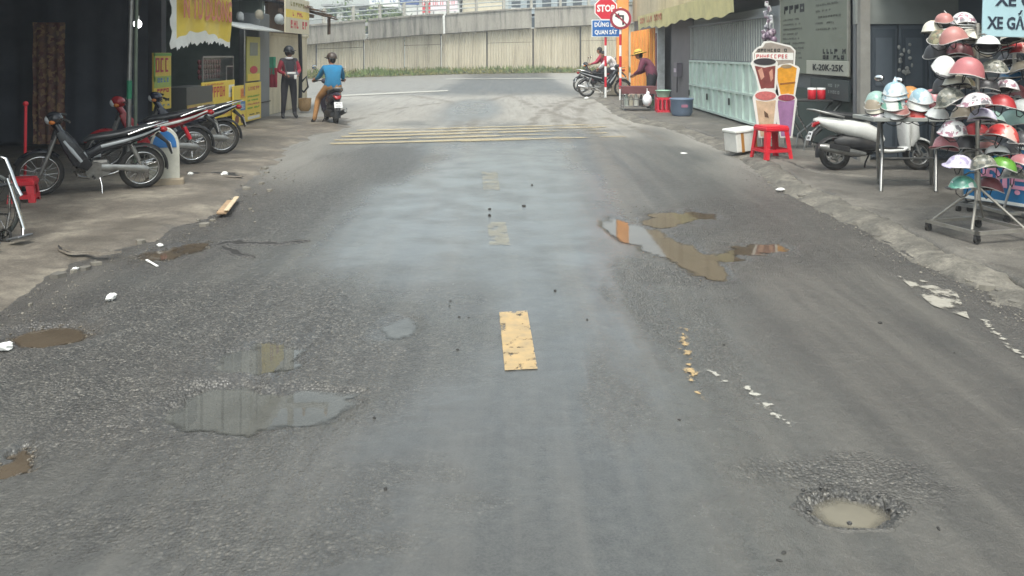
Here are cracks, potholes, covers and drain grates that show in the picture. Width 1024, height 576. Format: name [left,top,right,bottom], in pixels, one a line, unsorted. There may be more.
pothole [128,240,213,261]
pothole [789,481,916,534]
pothole [602,206,786,282]
pothole [6,324,96,348]
crack [57,244,122,255]
pothole [0,447,39,480]
